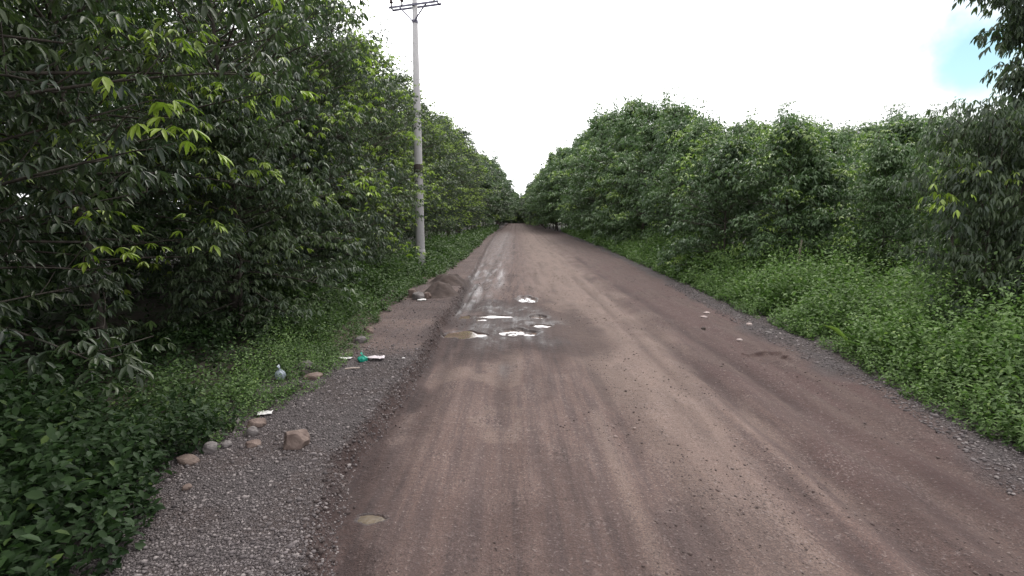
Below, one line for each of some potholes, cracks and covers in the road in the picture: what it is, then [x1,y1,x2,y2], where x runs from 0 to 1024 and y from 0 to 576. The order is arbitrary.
pothole [511,295,542,304]
pothole [490,326,548,338]
pothole [435,327,495,341]
